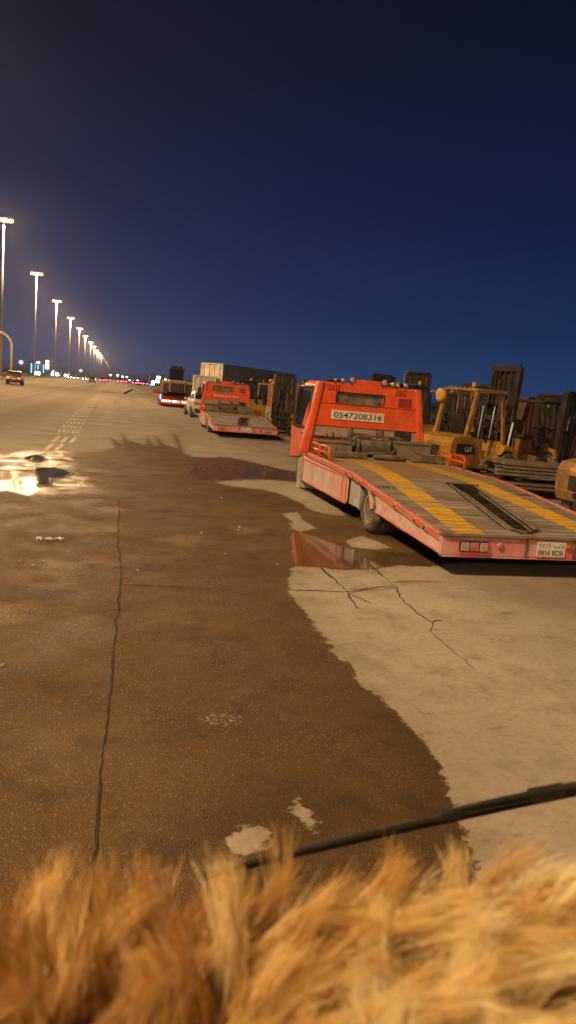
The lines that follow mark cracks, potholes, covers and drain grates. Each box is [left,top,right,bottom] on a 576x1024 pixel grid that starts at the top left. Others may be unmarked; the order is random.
crack [370,564,472,667]
crack [320,567,372,609]
crack [88,500,227,919]
